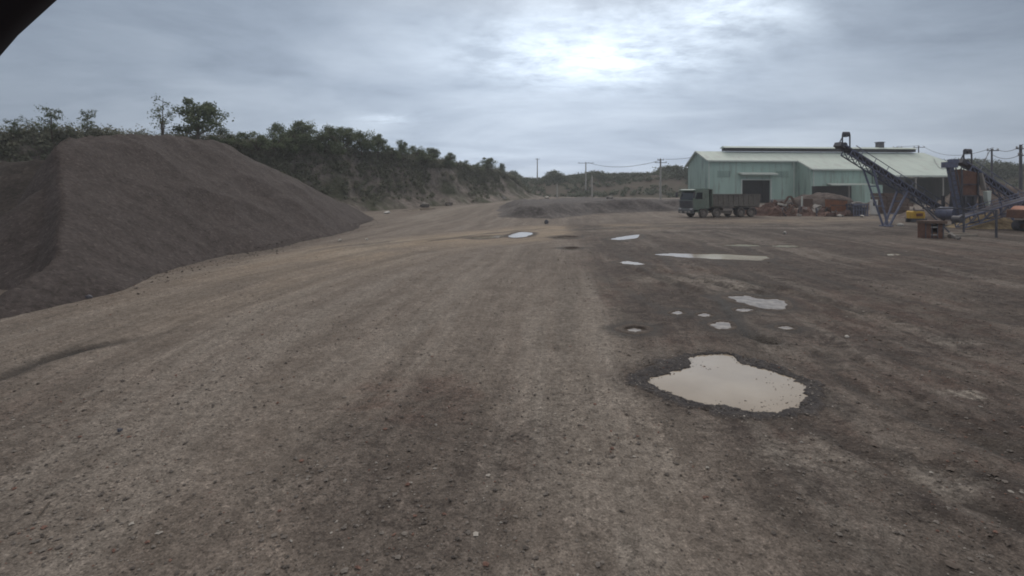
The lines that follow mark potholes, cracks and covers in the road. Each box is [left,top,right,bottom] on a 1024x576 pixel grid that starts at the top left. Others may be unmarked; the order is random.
pothole [614,324,654,334]
pothole [651,252,777,261]
pothole [721,294,793,311]
pothole [624,350,828,421]
pothole [707,319,737,330]
